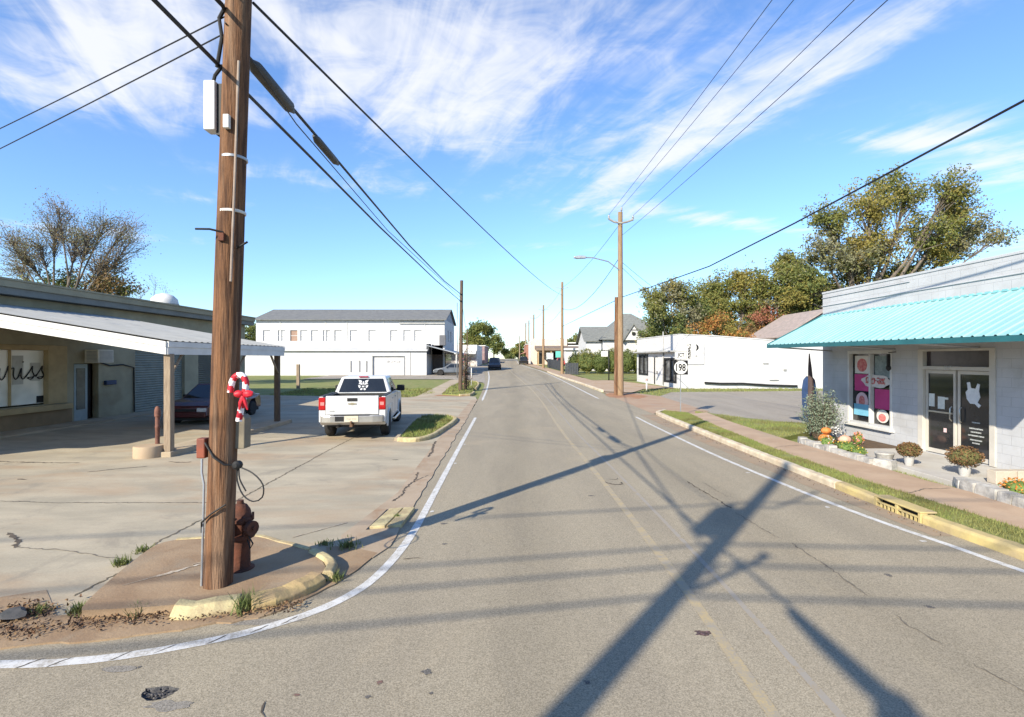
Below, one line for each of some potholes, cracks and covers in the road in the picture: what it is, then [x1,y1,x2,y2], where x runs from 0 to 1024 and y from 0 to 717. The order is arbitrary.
crack [6,533,114,558]
pothole [141,686,179,701]
drain grate [874,495,937,524]
crack [392,441,437,501]
